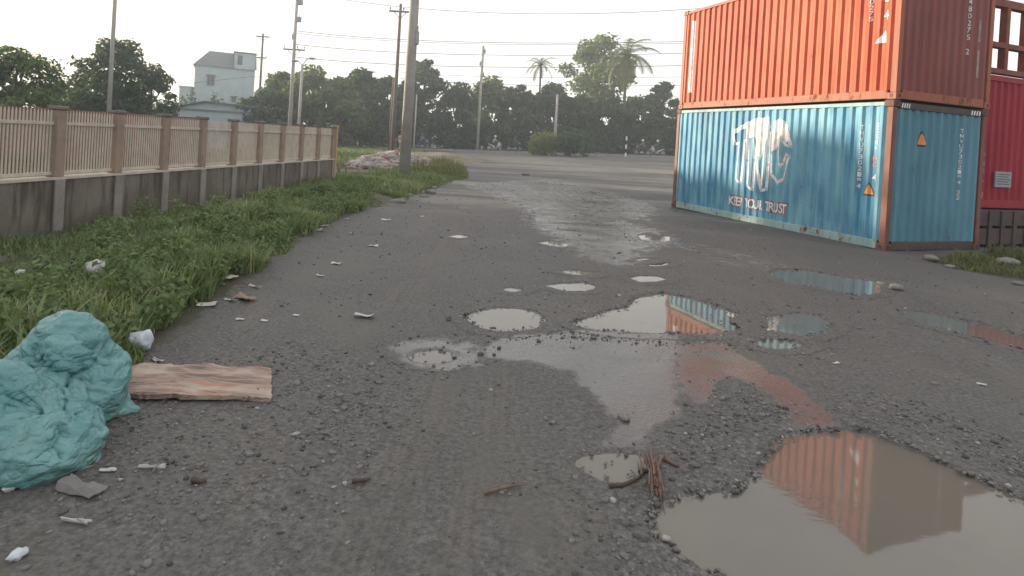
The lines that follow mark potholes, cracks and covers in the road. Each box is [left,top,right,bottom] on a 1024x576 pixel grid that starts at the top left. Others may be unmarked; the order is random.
pothole [556,288,769,341]
pothole [617,271,681,286]
pothole [733,332,826,356]
pothole [538,432,684,503]
pothole [730,307,854,342]
pothole [444,302,561,338]
pothole [531,277,612,295]
pothole [605,412,1024,576]
pothole [878,305,1024,353]
pothole [385,341,481,373]
pothole [755,265,898,299]
